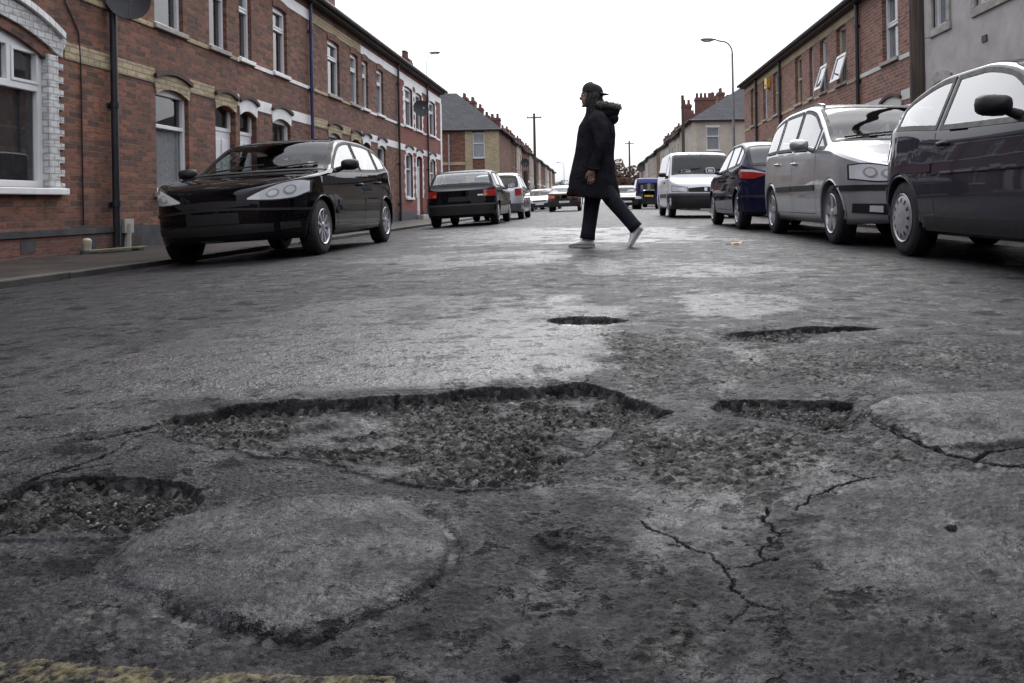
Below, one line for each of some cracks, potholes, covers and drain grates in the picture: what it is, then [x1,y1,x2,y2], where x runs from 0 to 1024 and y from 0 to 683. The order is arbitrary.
crack [641,507,782,618]
pothole [711,326,887,344]
pothole [542,316,634,327]
pothole [705,398,867,435]
pothole [0,473,214,546]
pothole [151,381,681,494]
crack [795,423,1024,511]
